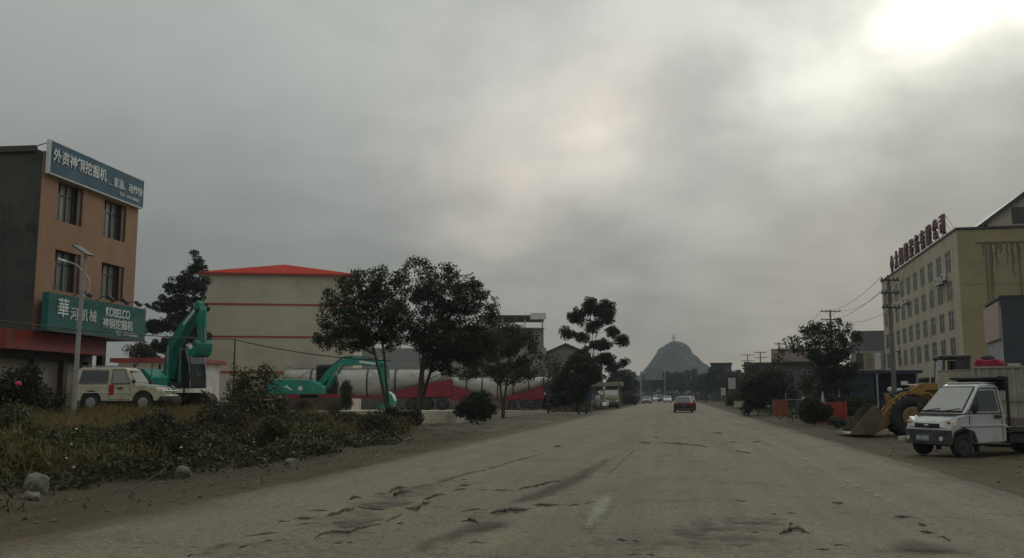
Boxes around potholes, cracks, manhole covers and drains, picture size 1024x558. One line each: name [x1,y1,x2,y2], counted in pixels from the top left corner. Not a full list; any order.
crack [411,479,566,512]
crack [640,432,760,454]
crack [238,493,403,548]
